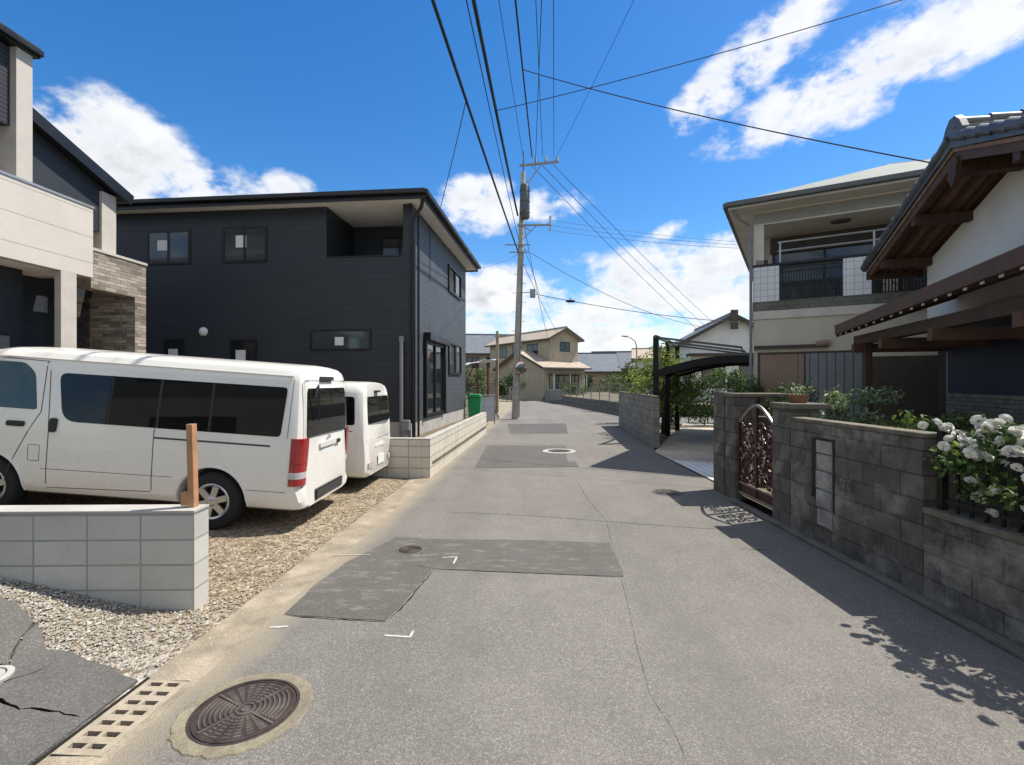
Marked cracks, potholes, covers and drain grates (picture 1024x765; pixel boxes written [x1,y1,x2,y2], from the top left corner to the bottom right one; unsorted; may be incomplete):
manhole cover [396,545,424,555]
manhole cover [167,672,314,760]
utility cover [0,665,15,684]
crack [0,618,80,717]
